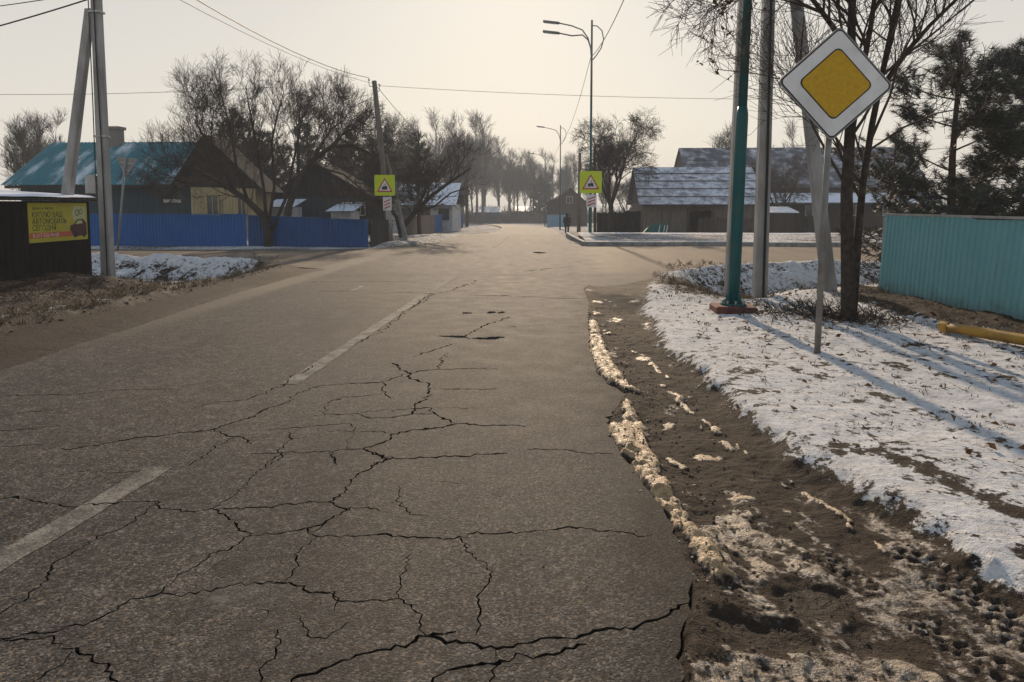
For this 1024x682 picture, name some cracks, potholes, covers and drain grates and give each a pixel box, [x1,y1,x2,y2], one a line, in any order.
crack [413,317,515,357]
crack [321,280,579,345]
crack [0,353,688,682]
